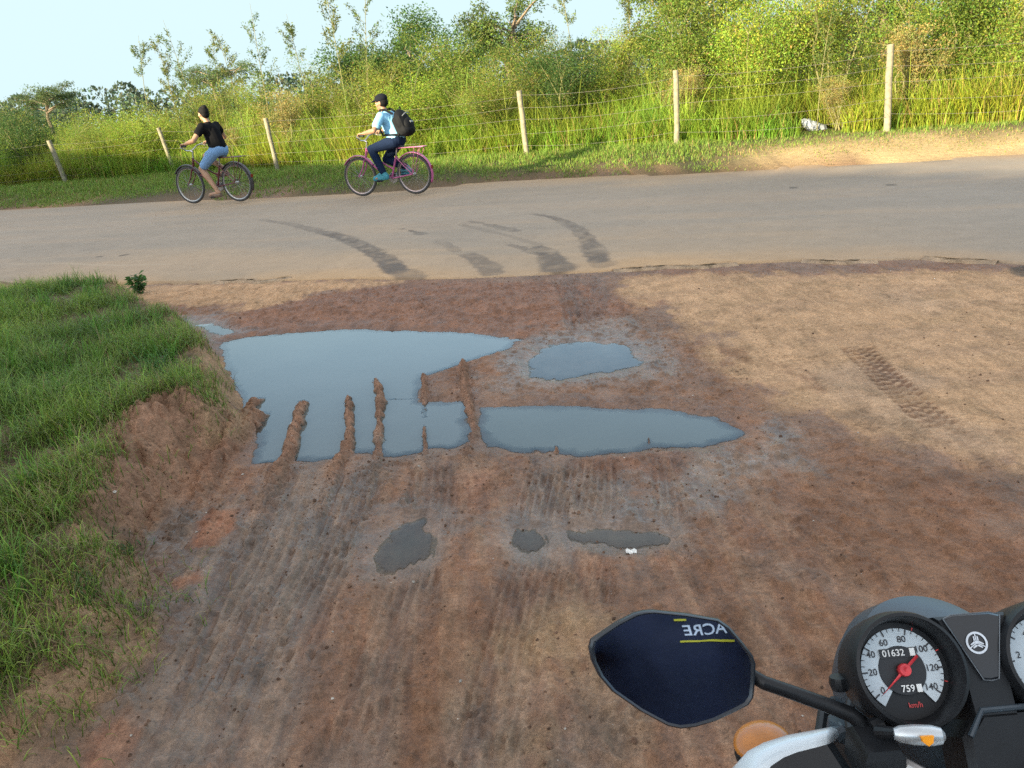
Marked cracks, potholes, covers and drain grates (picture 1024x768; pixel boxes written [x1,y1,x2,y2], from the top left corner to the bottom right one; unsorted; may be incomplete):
pothole [212,325,530,466]
pothole [472,398,755,459]
